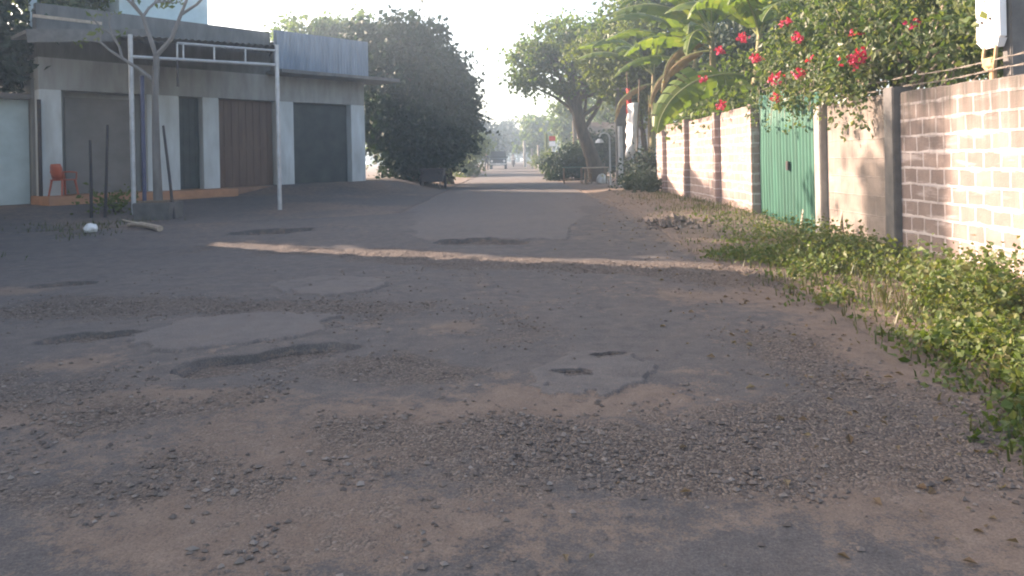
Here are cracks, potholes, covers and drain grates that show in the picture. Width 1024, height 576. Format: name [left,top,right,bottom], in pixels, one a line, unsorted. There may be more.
pothole [221,227,317,236]
pothole [548,368,594,377]
pothole [30,329,150,346]
pothole [159,341,368,382]
pothole [432,237,534,246]
pothole [26,281,101,289]
